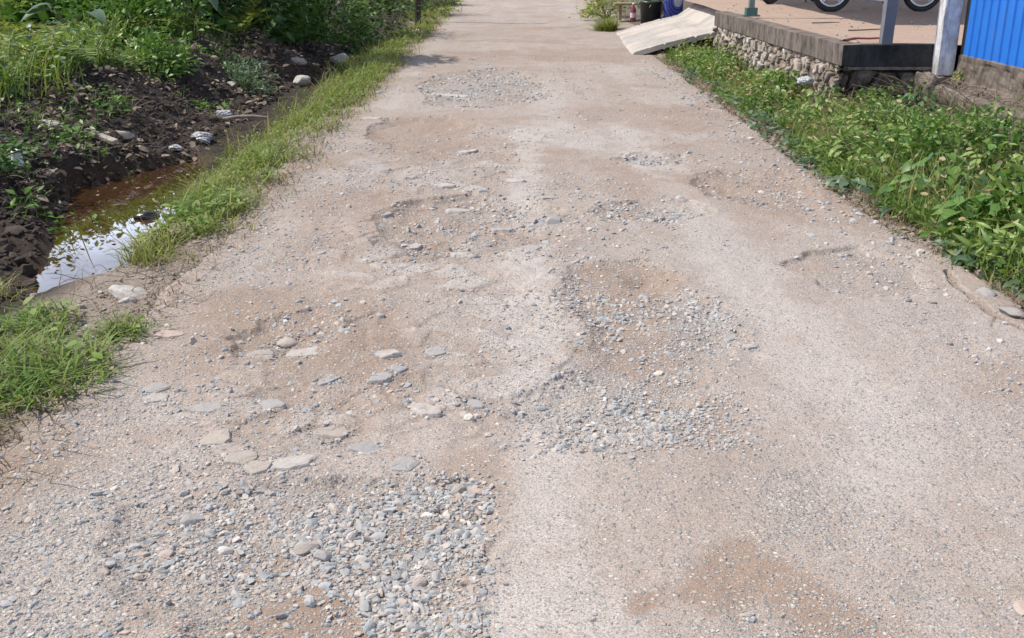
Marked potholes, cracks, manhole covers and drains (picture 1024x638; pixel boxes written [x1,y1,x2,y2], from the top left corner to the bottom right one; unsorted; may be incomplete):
pothole [679,167,832,216]
pothole [607,151,698,167]
pothole [359,189,587,261]
pothole [413,67,555,109]
pothole [589,198,718,223]
pothole [85,467,520,638]
pothole [504,259,751,453]
crack [941,269,1024,331]
